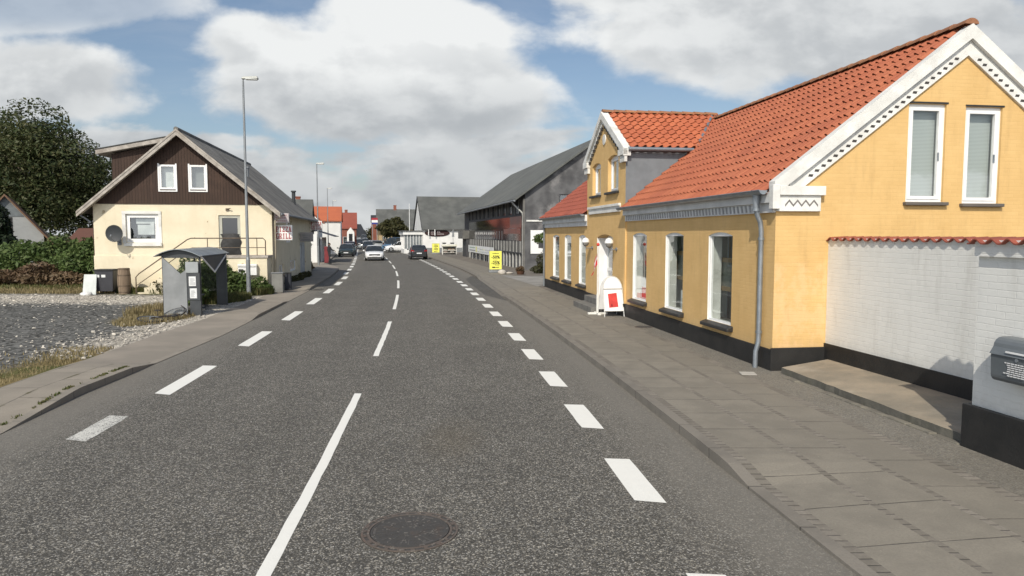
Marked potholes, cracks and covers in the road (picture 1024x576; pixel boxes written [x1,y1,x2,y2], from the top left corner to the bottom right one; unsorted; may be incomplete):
manhole cover [361,512,458,553]
